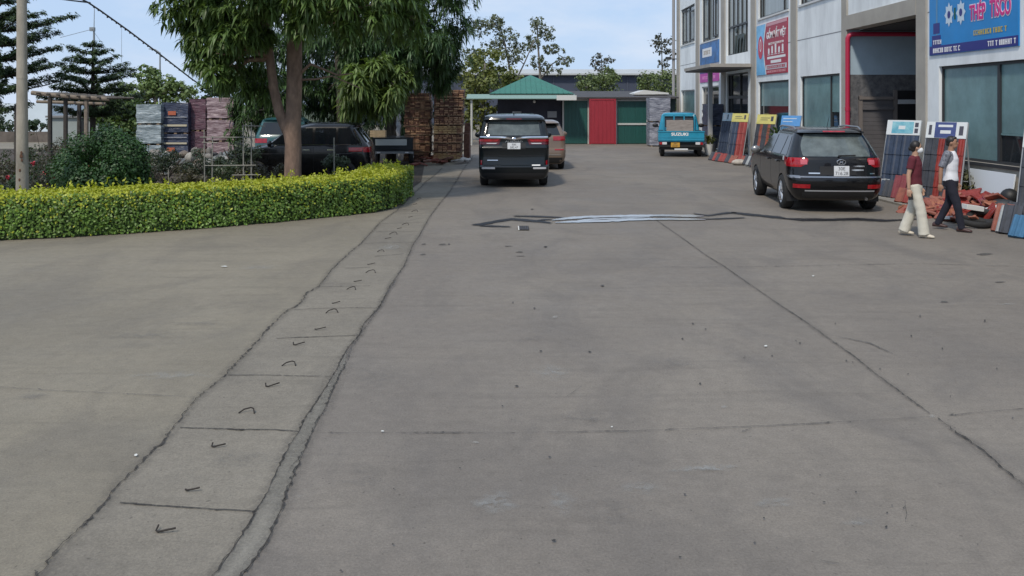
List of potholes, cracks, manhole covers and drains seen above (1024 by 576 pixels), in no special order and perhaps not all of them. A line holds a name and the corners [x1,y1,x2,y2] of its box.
crack [35,168,442,576]
